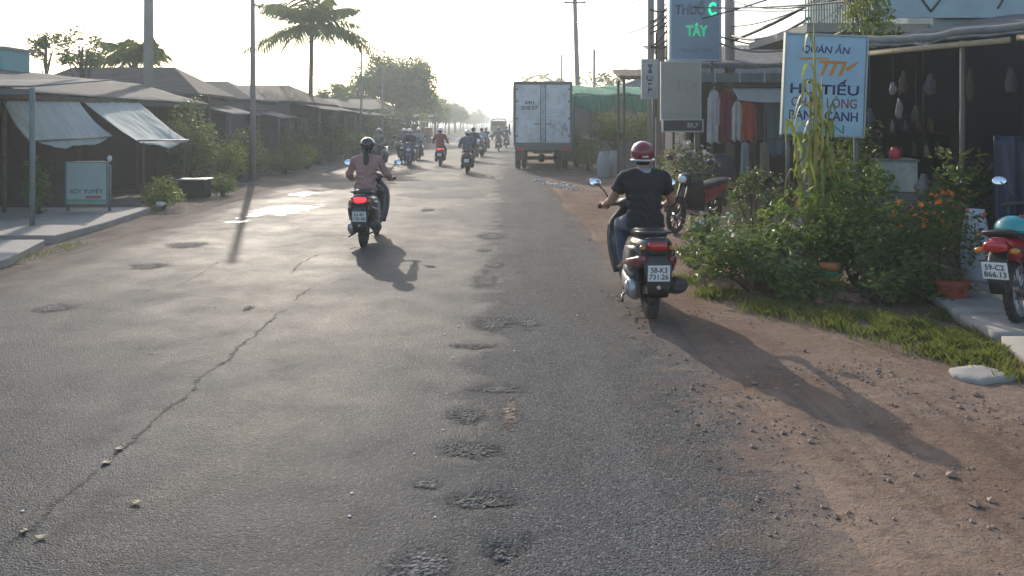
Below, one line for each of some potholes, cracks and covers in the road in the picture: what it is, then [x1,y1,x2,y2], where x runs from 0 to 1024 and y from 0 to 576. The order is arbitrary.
pothole [449,342,495,350]
pothole [444,490,514,509]
pothole [471,317,519,330]
pothole [489,543,527,566]
pothole [438,442,503,458]
pothole [446,408,488,424]
